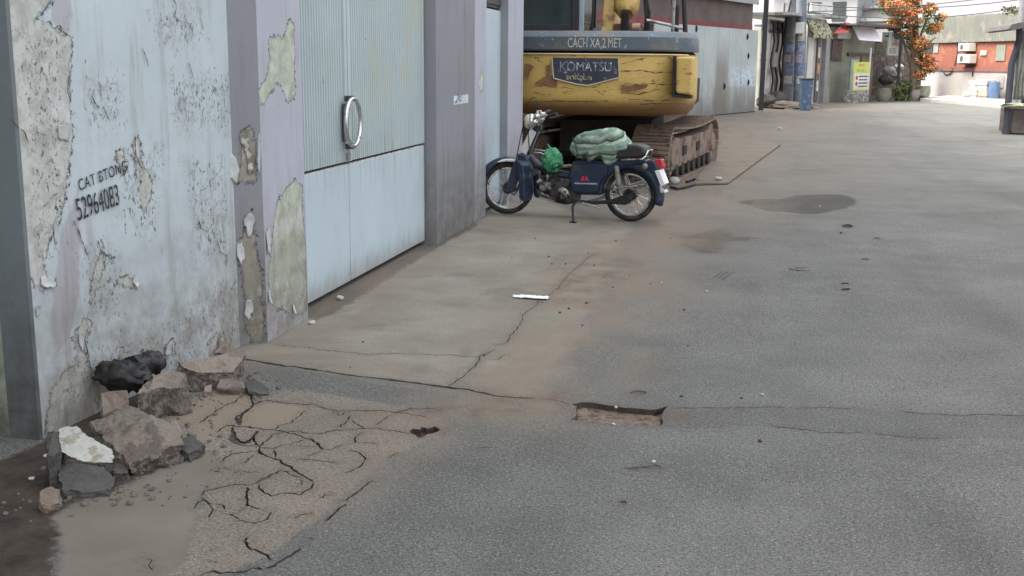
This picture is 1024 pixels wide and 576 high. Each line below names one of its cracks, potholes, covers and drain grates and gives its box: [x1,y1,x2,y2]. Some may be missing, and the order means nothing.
pothole [571,402,667,425]
crack [194,254,594,575]
pothole [410,426,440,438]
